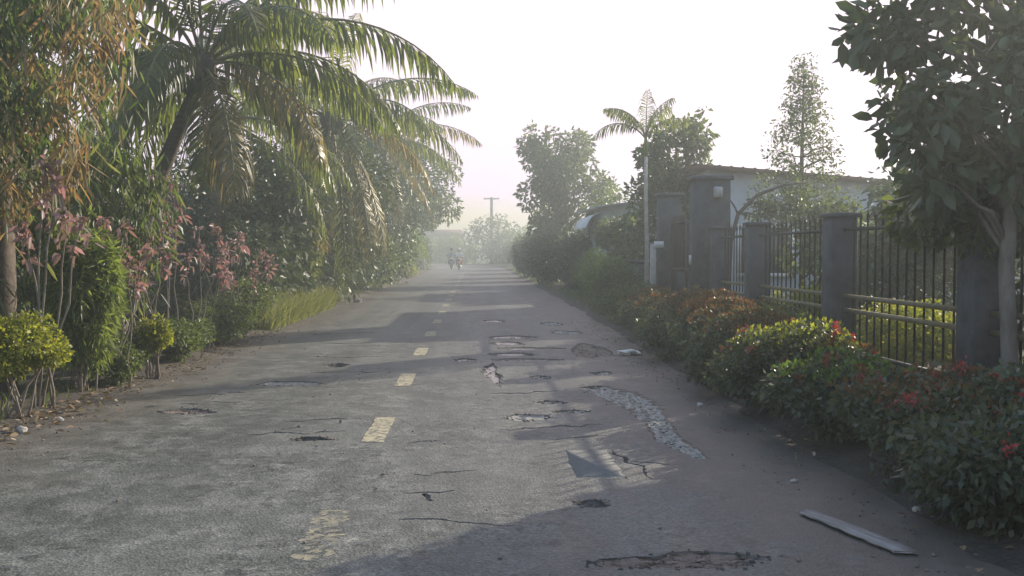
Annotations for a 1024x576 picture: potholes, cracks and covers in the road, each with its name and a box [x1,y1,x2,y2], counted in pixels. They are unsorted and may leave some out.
crack [410,469,478,501]
crack [400,518,514,526]
pothole [586,549,783,570]
pothole [481,363,504,387]
pothole [582,386,709,459]
crack [252,418,342,435]
pothole [573,498,611,508]
pothole [502,413,553,422]
crack [513,424,679,480]
pothole [571,343,614,358]
